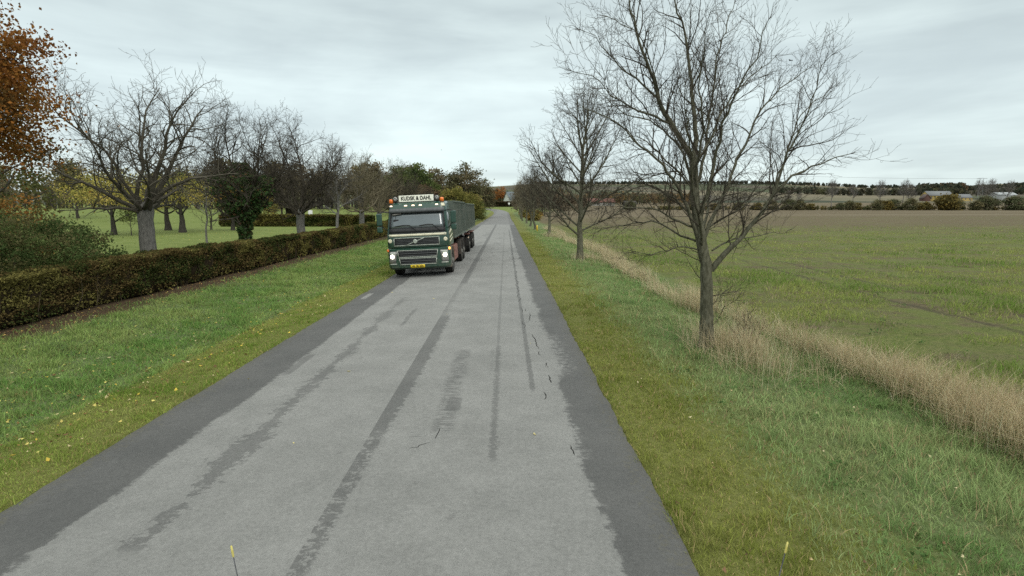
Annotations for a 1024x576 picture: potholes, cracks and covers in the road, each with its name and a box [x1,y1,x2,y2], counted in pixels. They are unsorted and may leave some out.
crack [511,243,552,400]
